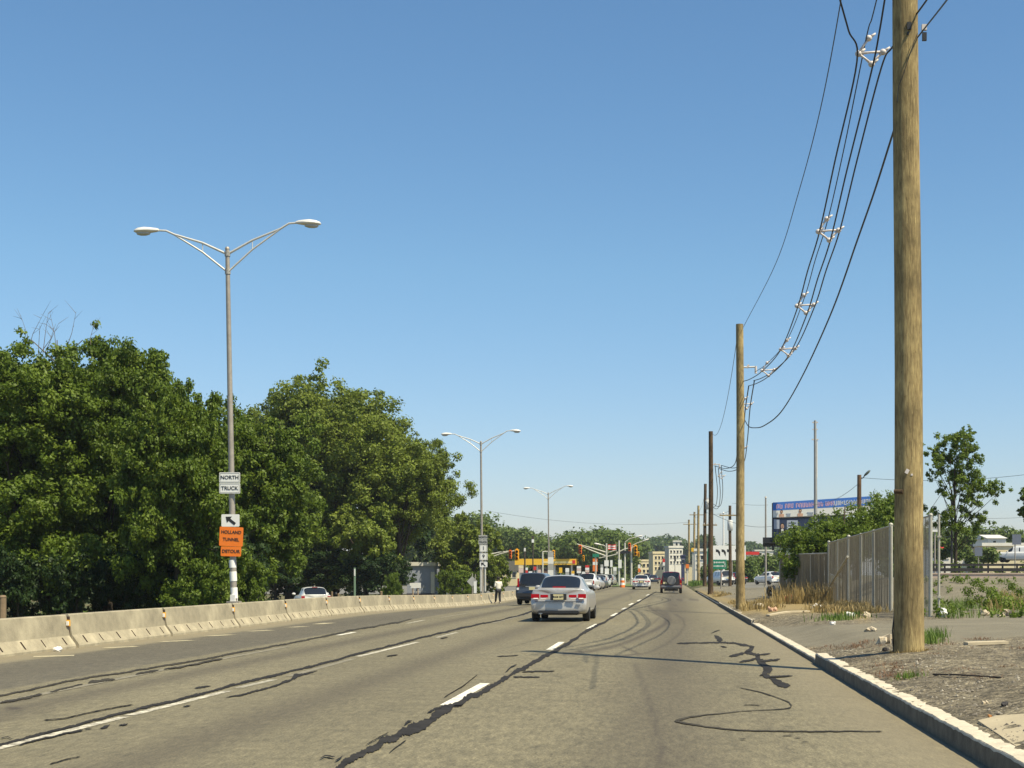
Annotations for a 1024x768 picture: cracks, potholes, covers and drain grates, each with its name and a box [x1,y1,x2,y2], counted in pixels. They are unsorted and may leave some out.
crack [229,671,315,697]
crack [497,655,554,678]
